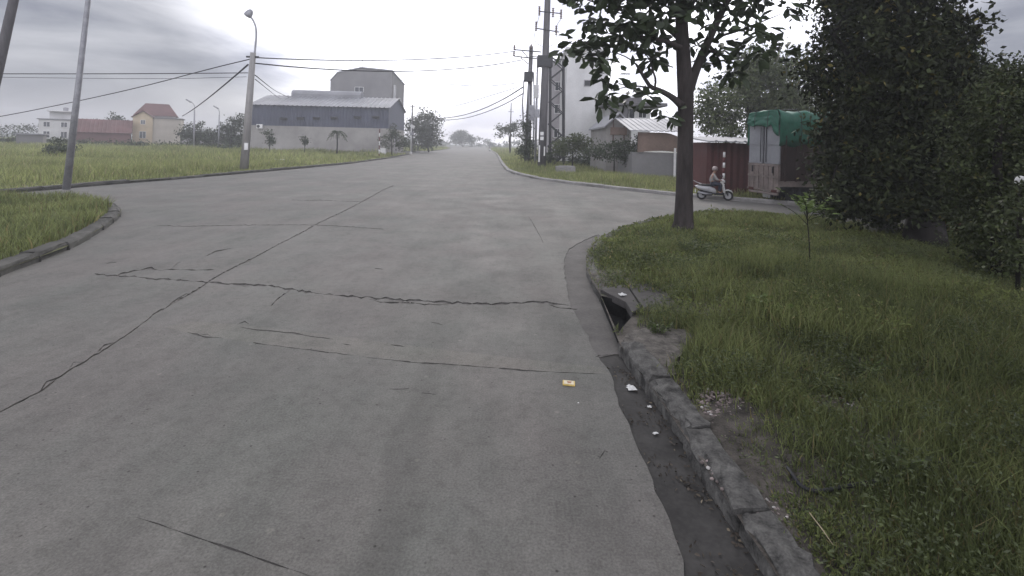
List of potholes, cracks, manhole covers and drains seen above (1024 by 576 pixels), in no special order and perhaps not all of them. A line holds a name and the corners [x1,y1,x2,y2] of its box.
drain grate [600,284,670,342]
crack [0,186,576,412]
crack [136,517,310,576]
